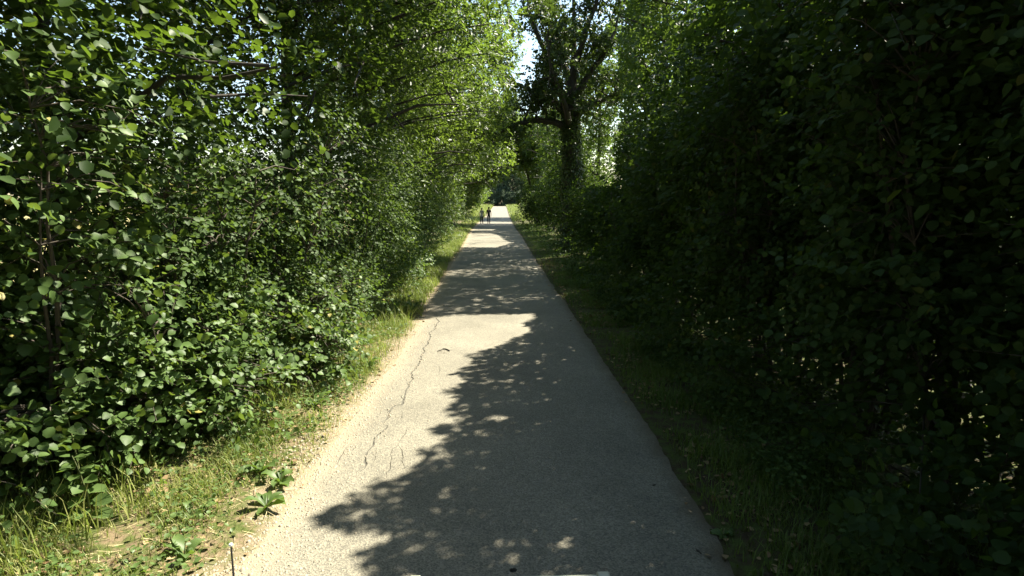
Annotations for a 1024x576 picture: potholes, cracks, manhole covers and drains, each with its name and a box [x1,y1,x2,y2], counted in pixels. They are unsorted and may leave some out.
crack [361,318,440,480]
